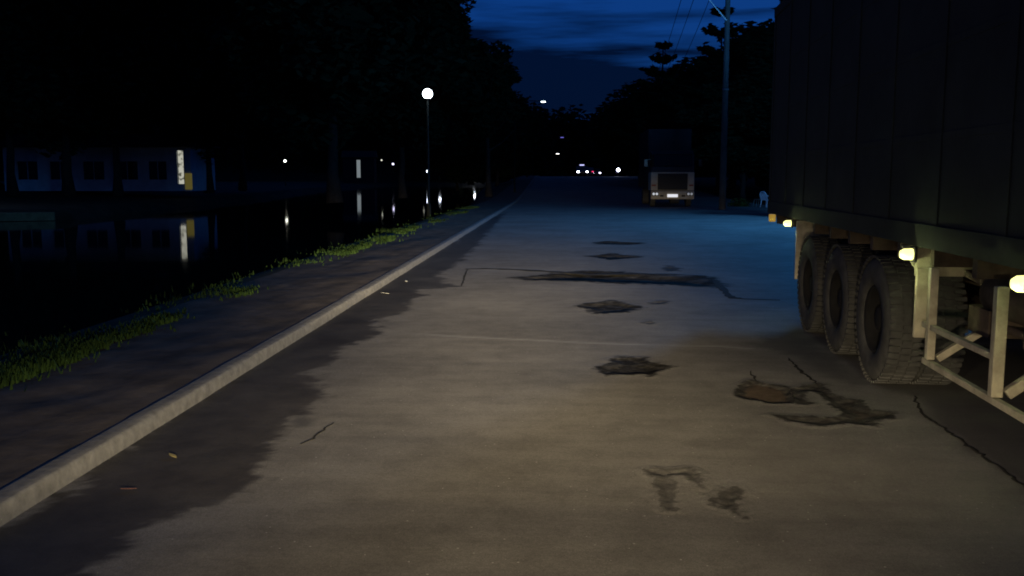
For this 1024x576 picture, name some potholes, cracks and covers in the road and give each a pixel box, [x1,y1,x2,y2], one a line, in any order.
crack [461,268,770,300]
pothole [568,300,662,315]
crack [750,358,1024,487]
pothole [587,355,682,379]
crack [301,423,333,444]
